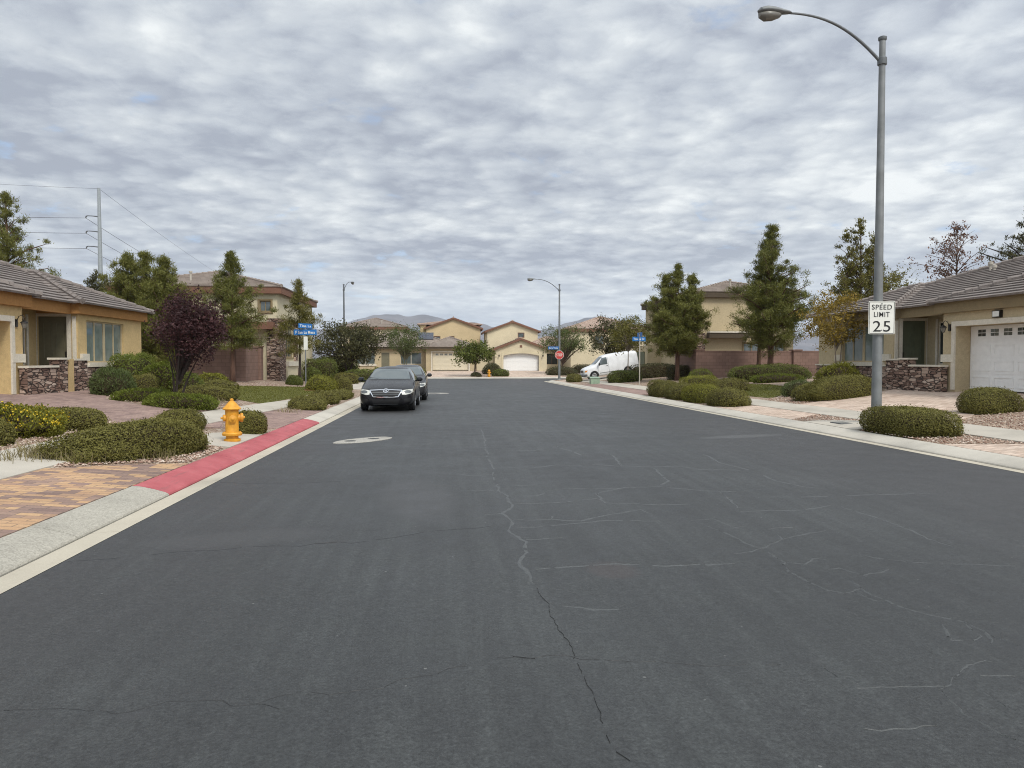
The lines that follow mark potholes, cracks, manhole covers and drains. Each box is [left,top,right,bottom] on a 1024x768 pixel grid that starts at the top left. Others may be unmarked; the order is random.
crack [461,429,1018,761]
crack [4,655,768,714]
